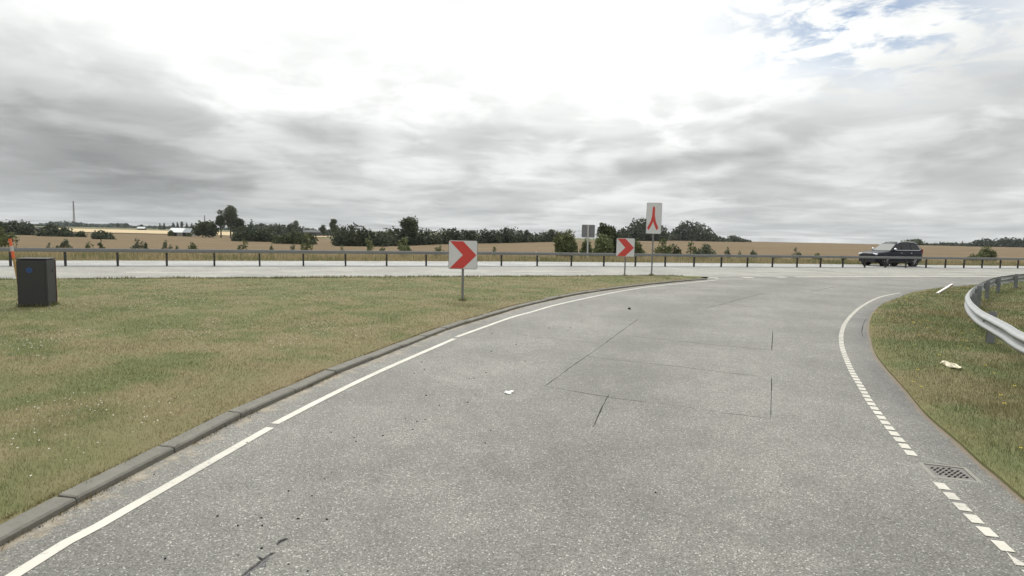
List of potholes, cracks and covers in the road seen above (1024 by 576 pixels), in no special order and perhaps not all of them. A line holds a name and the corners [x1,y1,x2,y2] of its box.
crack [526,319,773,426]
drain grate [919,462,983,483]
crack [241,538,288,576]
